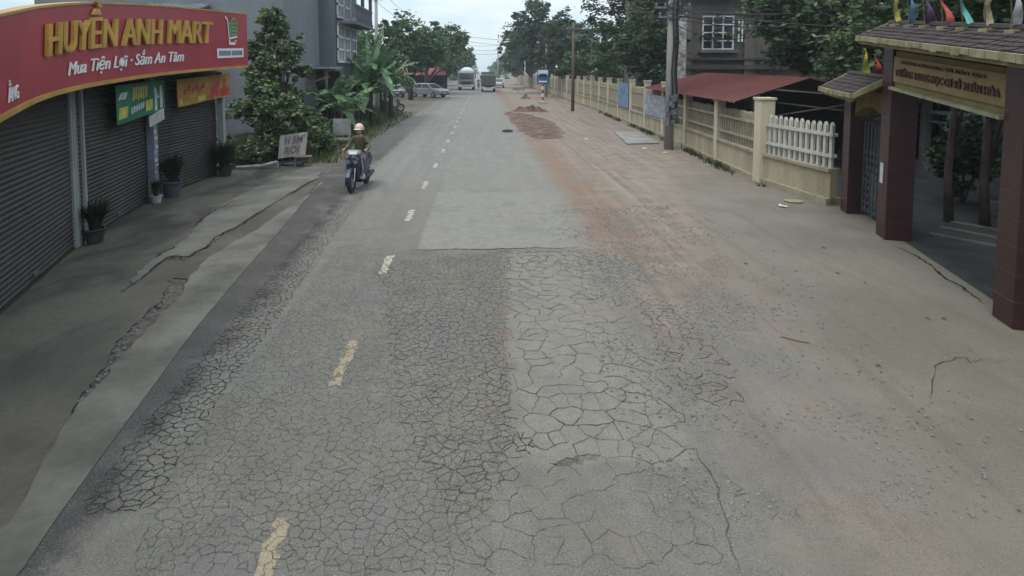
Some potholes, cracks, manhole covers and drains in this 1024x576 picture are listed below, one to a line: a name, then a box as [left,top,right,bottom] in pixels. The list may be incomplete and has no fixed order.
crack [134,244,746,576]
crack [85,181,373,514]
crack [930,357,1014,400]
crack [894,246,980,302]
pothole [550,453,601,467]
